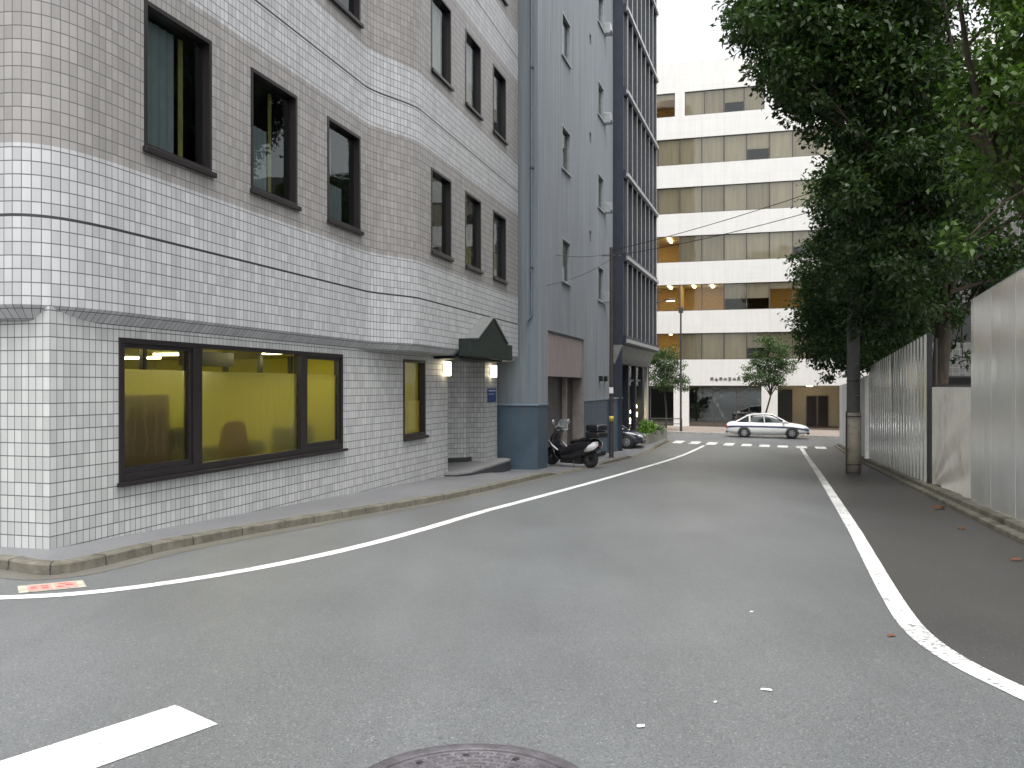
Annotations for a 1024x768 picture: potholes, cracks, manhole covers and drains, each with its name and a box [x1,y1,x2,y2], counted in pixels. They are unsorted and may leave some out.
manhole cover [368,743,579,768]
